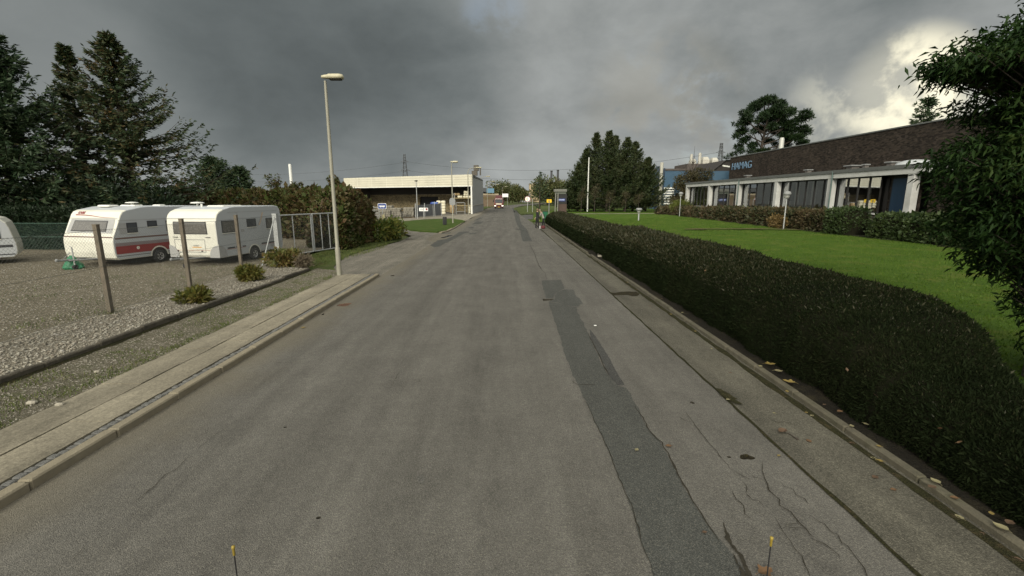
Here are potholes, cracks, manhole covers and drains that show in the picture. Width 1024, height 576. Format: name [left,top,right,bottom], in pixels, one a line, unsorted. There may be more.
crack [635,406,867,576]
